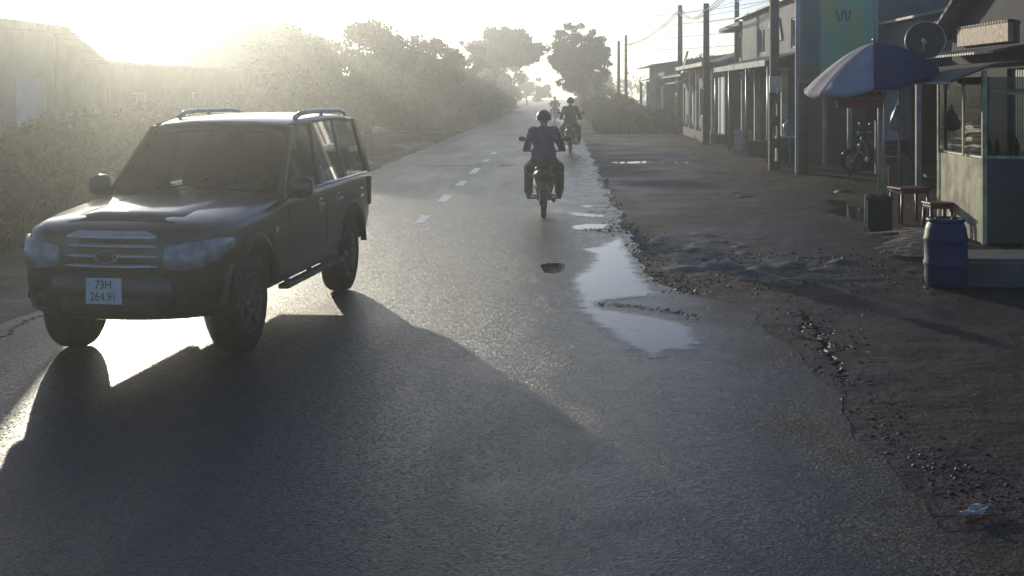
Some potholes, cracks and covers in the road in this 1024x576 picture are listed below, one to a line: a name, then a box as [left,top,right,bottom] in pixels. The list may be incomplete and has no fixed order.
crack [1,315,43,337]
pothole [540,263,565,274]
